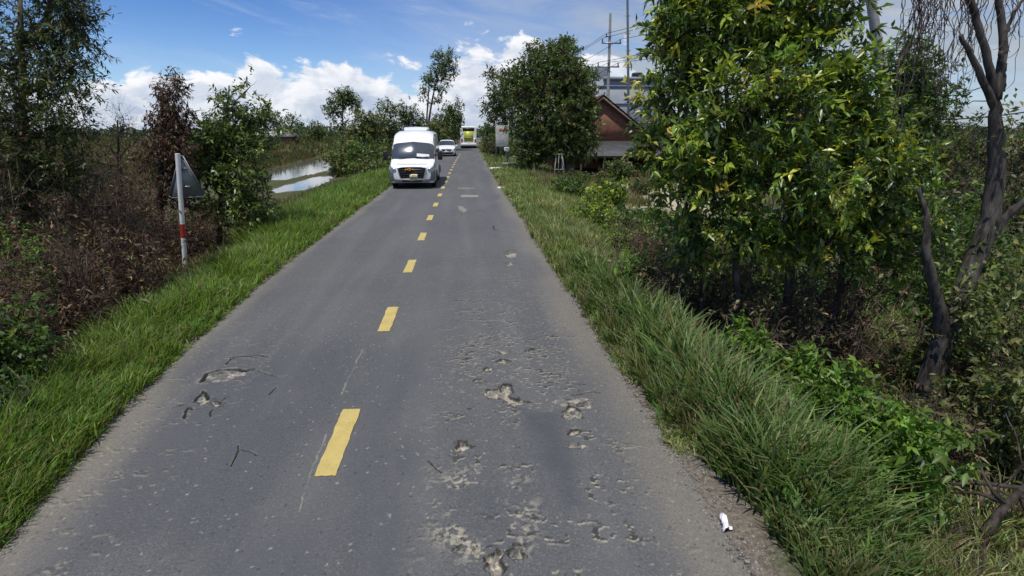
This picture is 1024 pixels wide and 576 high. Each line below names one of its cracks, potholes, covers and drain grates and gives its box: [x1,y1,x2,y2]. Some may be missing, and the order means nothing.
pothole [483,549,506,576]
pothole [200,370,250,383]
pothole [483,383,531,407]
pothole [561,406,584,419]
pothole [506,543,528,560]
crack [171,355,287,419]
pothole [453,440,473,455]
